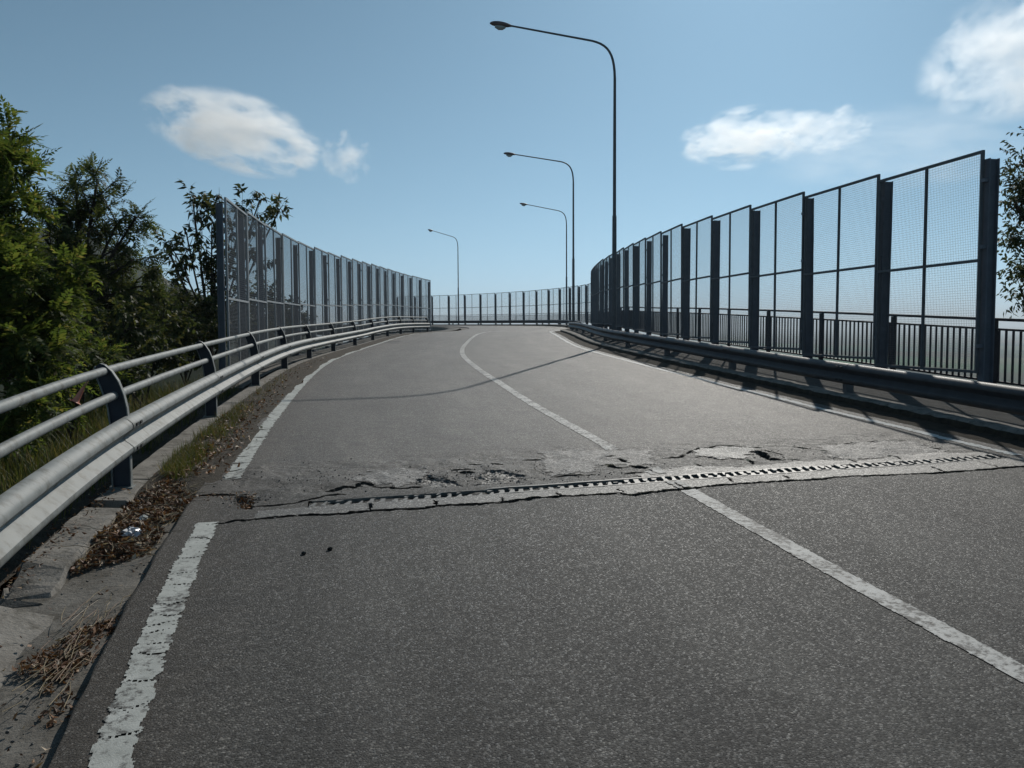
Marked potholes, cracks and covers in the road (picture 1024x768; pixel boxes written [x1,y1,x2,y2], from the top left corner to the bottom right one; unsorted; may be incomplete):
pothole [415,475,463,488]
pothole [750,450,788,461]
crack [198,440,1024,540]
pothole [475,470,529,486]
